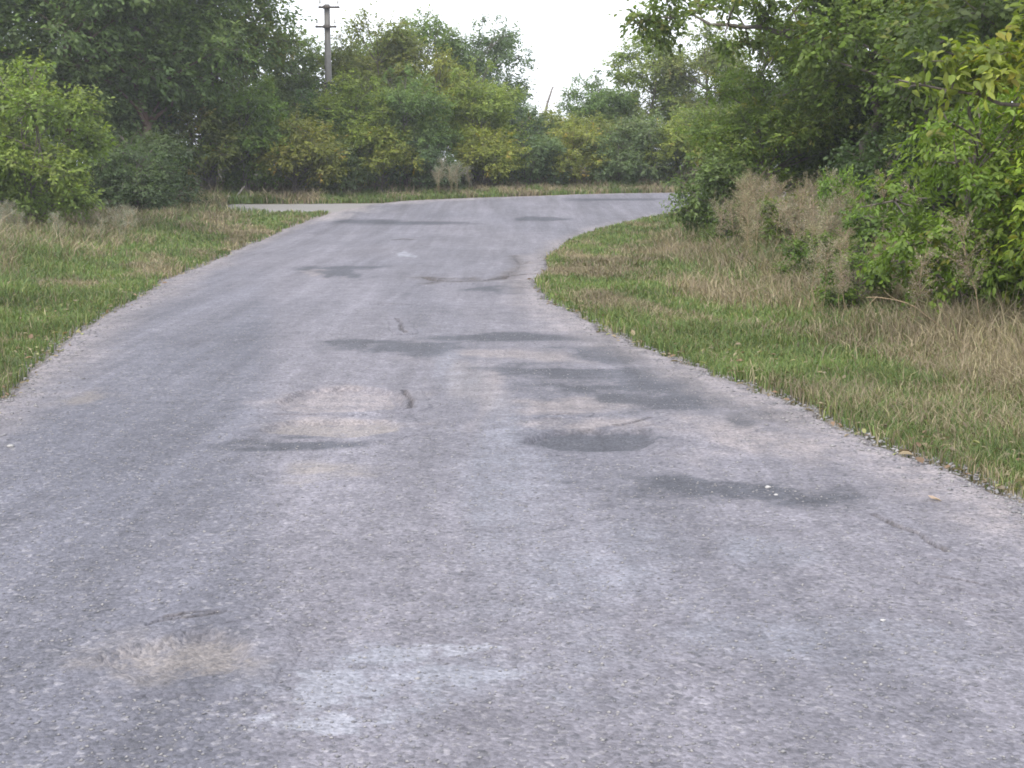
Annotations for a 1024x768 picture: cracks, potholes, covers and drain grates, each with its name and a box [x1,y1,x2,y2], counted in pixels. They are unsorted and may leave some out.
crack [844,509,1019,597]
pothole [63,617,300,699]
crack [257,388,432,419]
crack [530,410,670,429]
crack [111,602,262,636]
